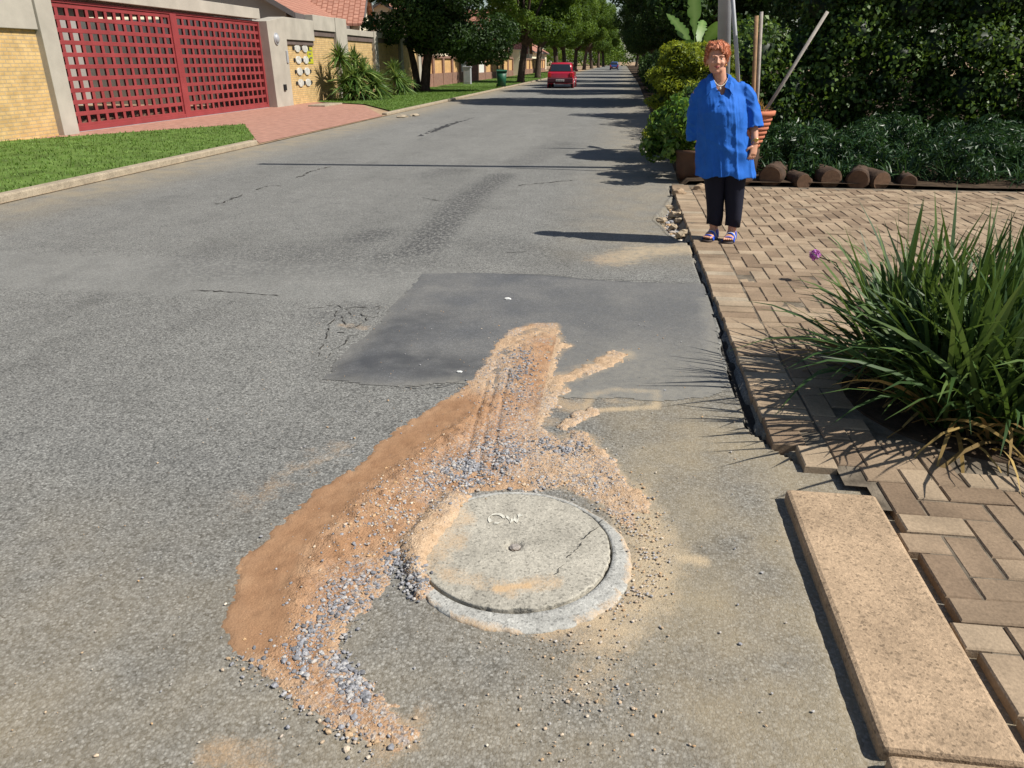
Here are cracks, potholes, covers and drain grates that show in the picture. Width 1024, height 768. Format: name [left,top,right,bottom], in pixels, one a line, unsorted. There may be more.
manhole cover [425,492,632,635]
crack [419,120,466,136]
crack [308,304,380,356]
